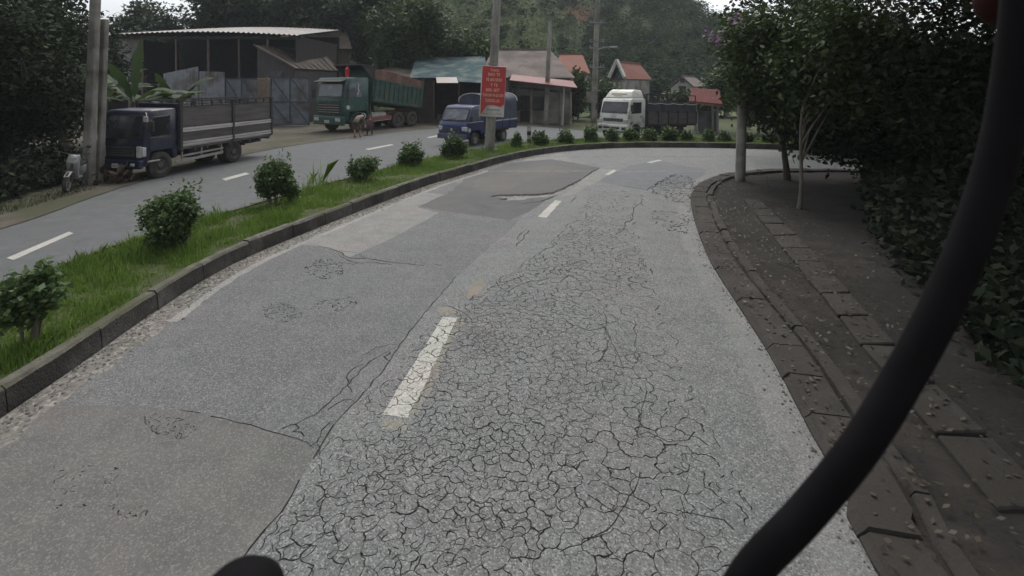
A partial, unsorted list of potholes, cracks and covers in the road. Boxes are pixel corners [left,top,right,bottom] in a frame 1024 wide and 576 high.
crack [144,409,311,446]
crack [259,191,755,576]
pothole [490,180,581,200]
crack [627,174,695,234]
